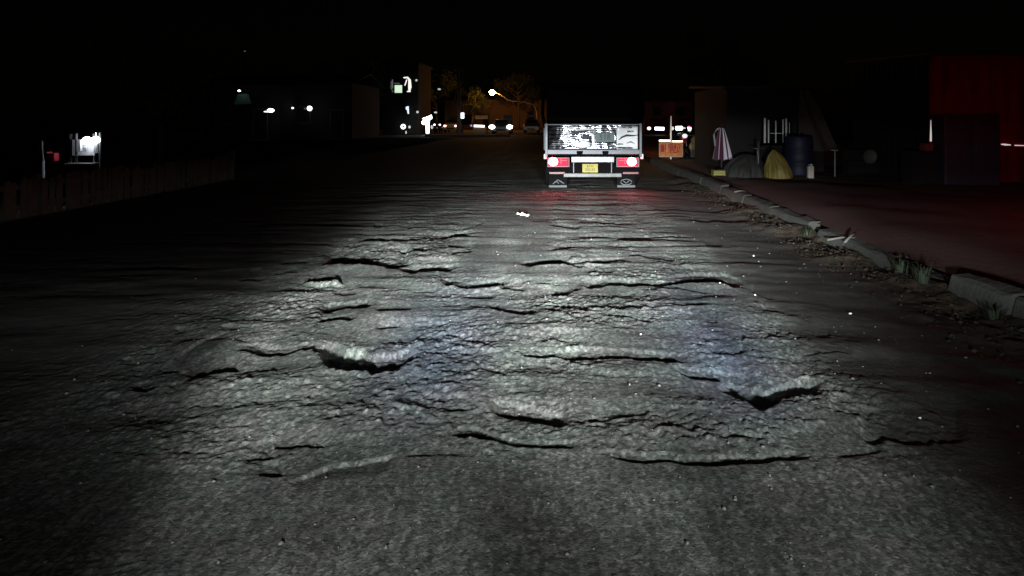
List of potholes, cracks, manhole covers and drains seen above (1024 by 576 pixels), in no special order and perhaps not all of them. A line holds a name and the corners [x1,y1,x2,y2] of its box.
crack [239,198,855,386]
pothole [319,340,420,375]
crack [172,322,243,360]
crack [245,400,818,483]
crack [835,444,887,457]
pothole [718,375,825,411]
pothole [490,399,573,427]
